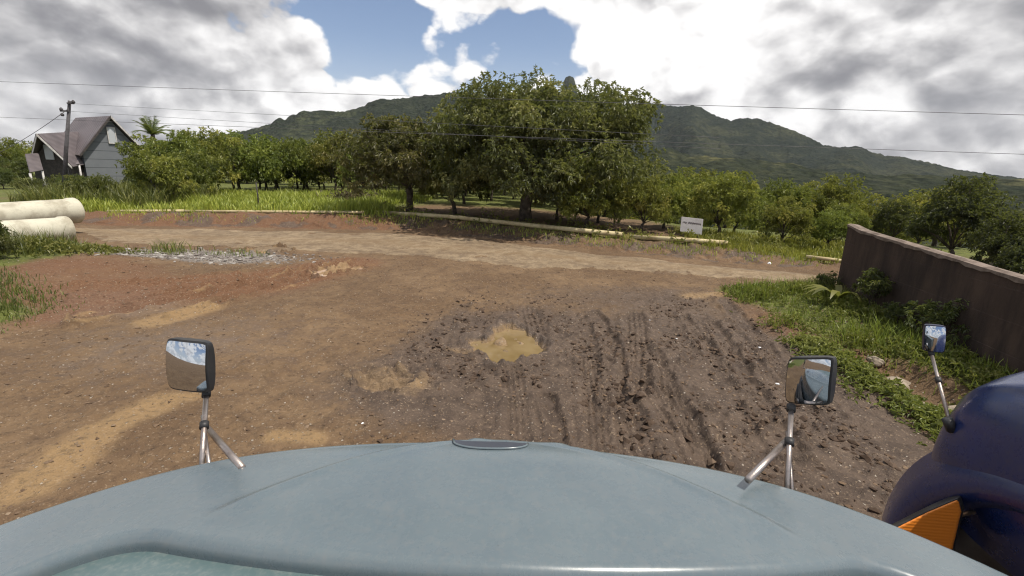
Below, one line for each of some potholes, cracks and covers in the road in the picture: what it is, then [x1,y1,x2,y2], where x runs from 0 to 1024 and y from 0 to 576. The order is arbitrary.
pothole [458,318,556,371]
